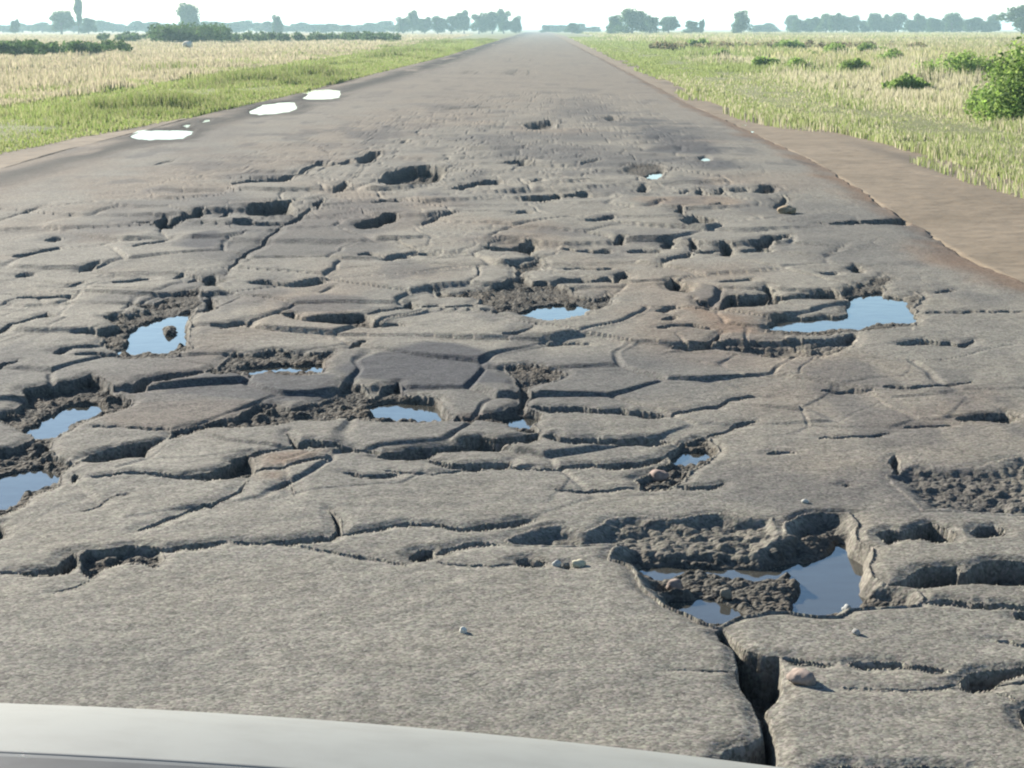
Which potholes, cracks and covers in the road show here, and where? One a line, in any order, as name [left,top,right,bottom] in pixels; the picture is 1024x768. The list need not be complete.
crack [665,668,736,676]
crack [354,251,444,262]
crack [780,656,961,693]
pothole [764,274,925,336]
crack [582,214,620,222]
crack [816,242,849,276]
crack [994,639,1024,648]
crack [365,304,482,319]
pothole [164,381,454,441]
crack [499,322,594,347]
pothole [374,164,452,185]
pothole [633,437,721,492]
